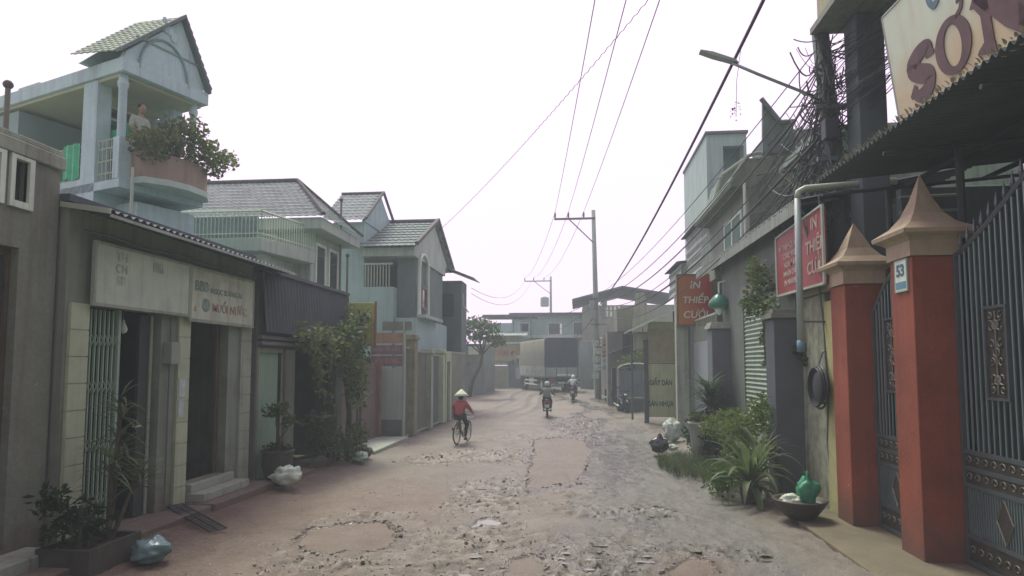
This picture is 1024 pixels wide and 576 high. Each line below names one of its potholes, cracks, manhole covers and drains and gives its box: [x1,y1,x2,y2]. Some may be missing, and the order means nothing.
crack [392,449,537,576]
pothole [468,514,508,528]
drain grate [166,503,227,532]
